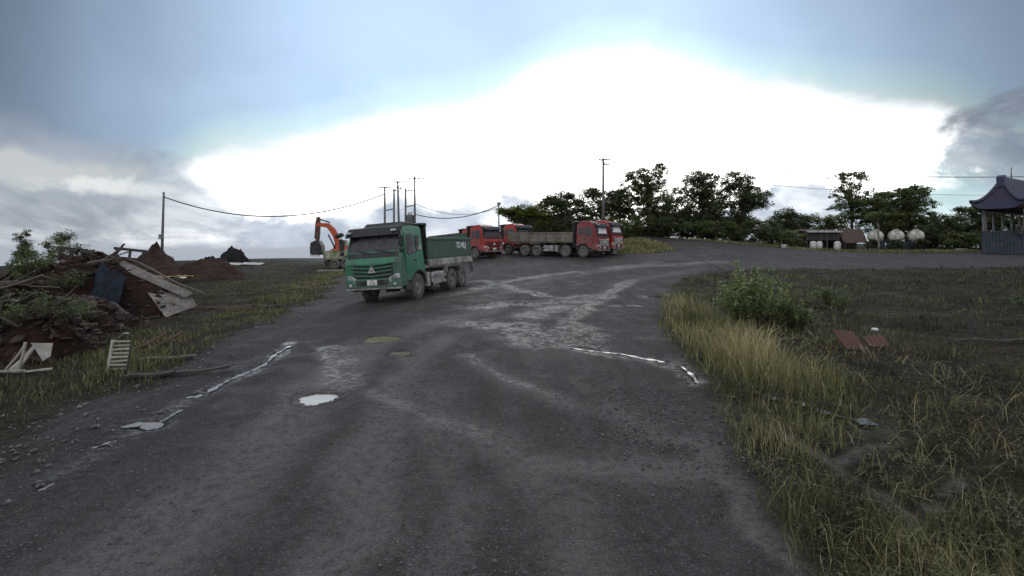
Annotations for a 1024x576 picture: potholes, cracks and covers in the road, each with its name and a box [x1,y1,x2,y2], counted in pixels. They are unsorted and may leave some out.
pothole [290,389,351,408]
